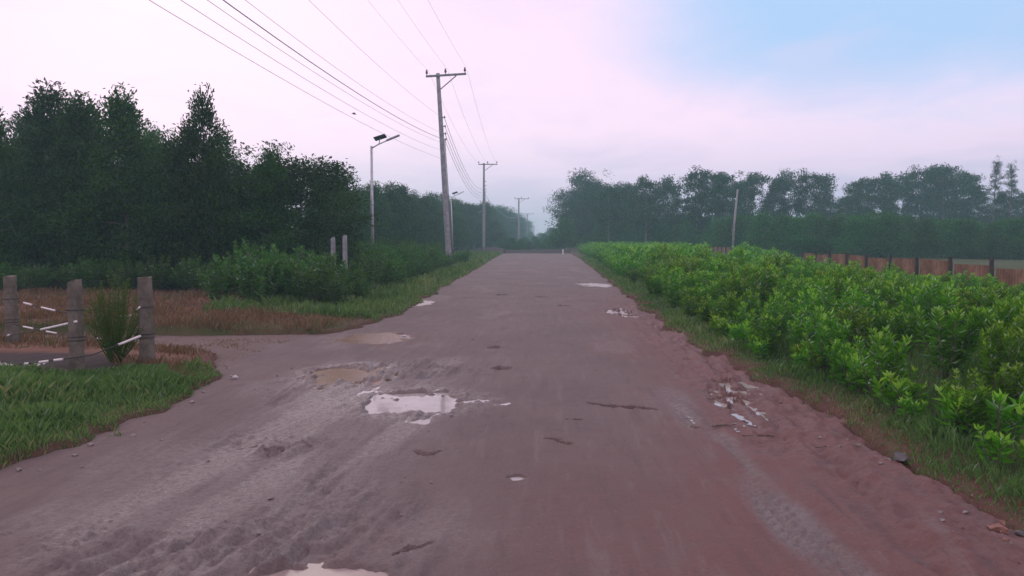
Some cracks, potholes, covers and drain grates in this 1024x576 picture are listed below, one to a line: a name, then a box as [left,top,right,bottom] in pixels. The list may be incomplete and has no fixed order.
pothole [331,331,416,344]
pothole [603,307,642,318]
pothole [356,387,511,425]
pothole [296,364,398,389]
pothole [199,554,406,576]
pothole [687,374,769,432]
